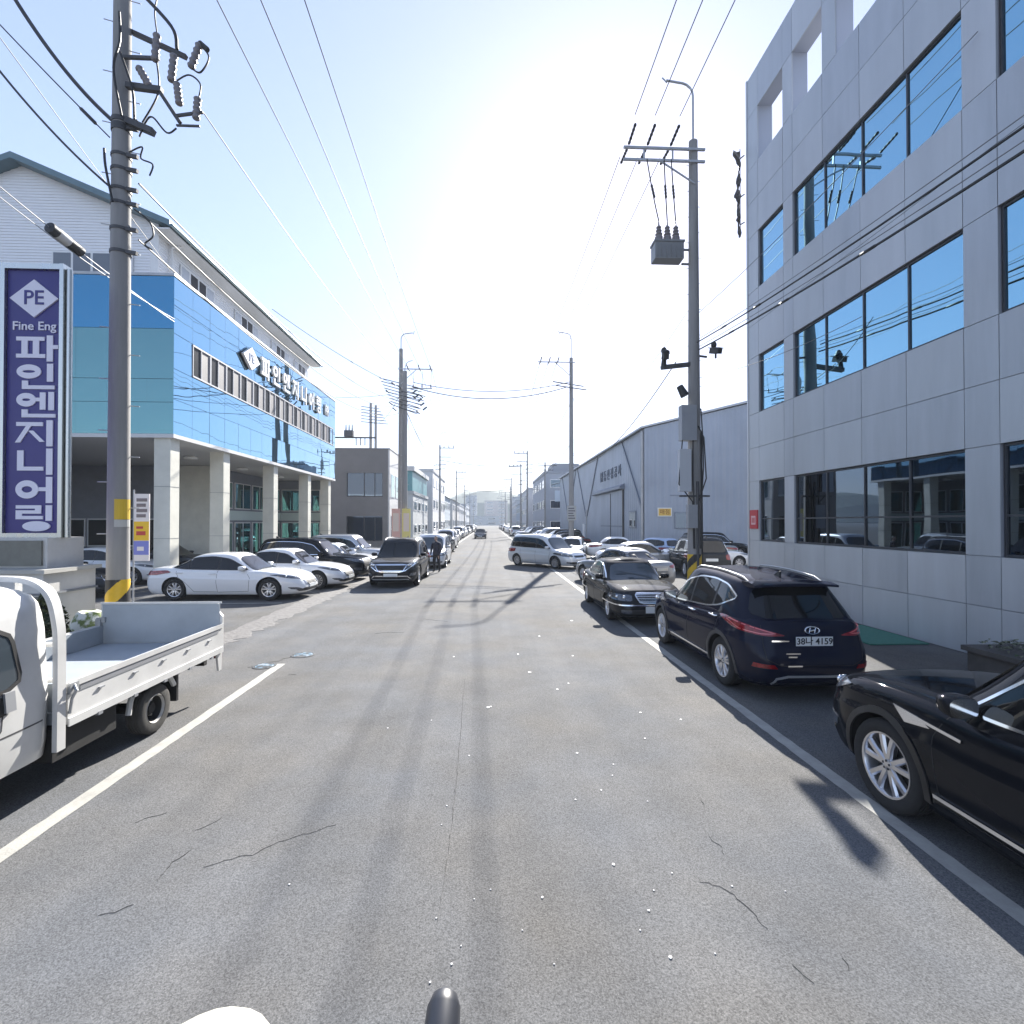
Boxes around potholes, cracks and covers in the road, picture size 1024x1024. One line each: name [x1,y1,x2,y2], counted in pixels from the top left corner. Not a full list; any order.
crack [159,825,334,878]
